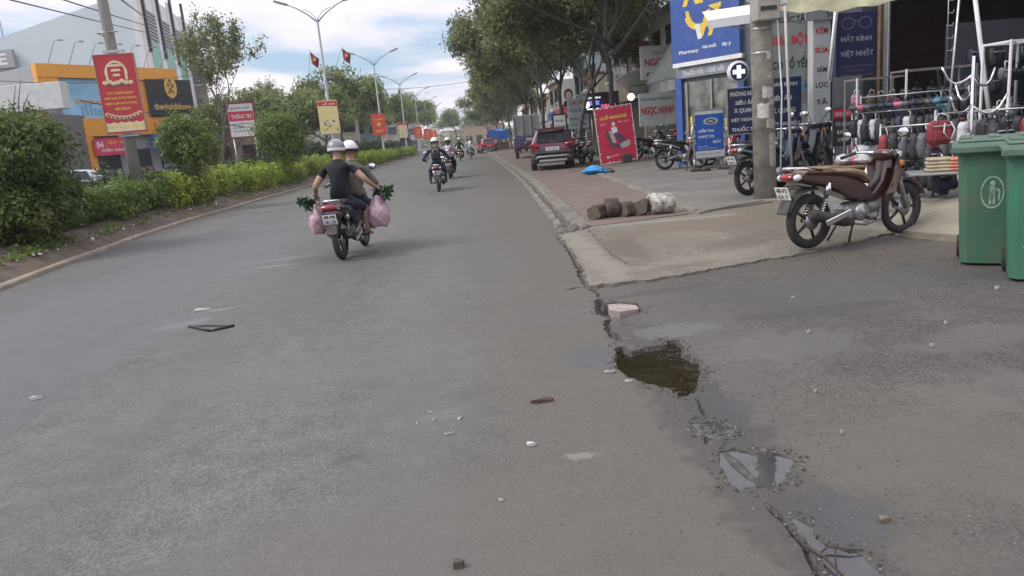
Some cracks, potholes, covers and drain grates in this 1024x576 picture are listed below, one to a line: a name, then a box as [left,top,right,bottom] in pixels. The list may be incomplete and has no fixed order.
pothole [606,337,715,399]
pothole [706,444,809,496]
crack [603,319,622,344]
